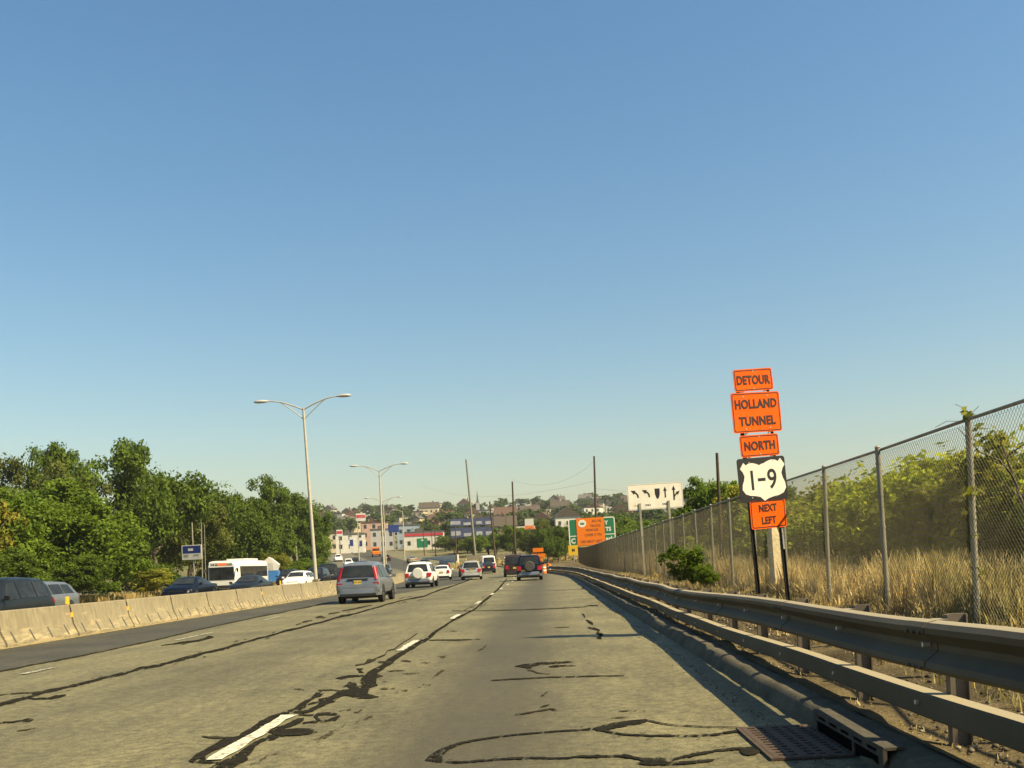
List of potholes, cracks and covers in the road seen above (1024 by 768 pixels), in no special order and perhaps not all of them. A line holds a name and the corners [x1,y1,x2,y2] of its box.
drain grate [736,708,906,768]
